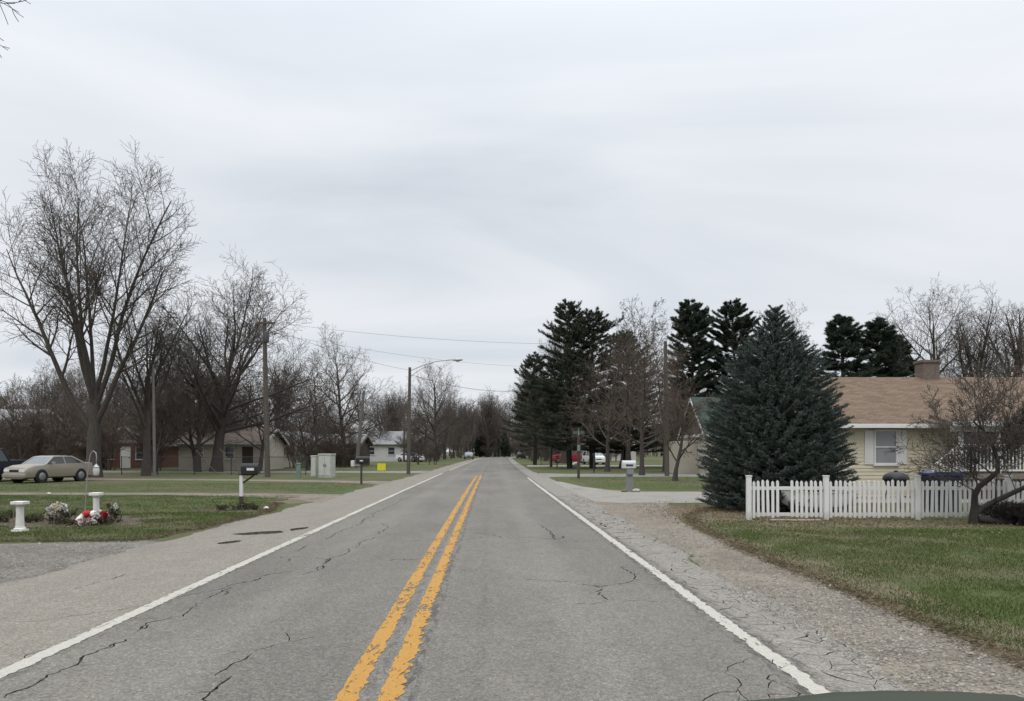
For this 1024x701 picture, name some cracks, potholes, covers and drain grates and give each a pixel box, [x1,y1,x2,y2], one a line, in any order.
crack [702,659,748,701]
crack [461,566,656,604]
crack [528,494,899,689]
crack [4,495,413,698]
crack [766,660,802,698]
